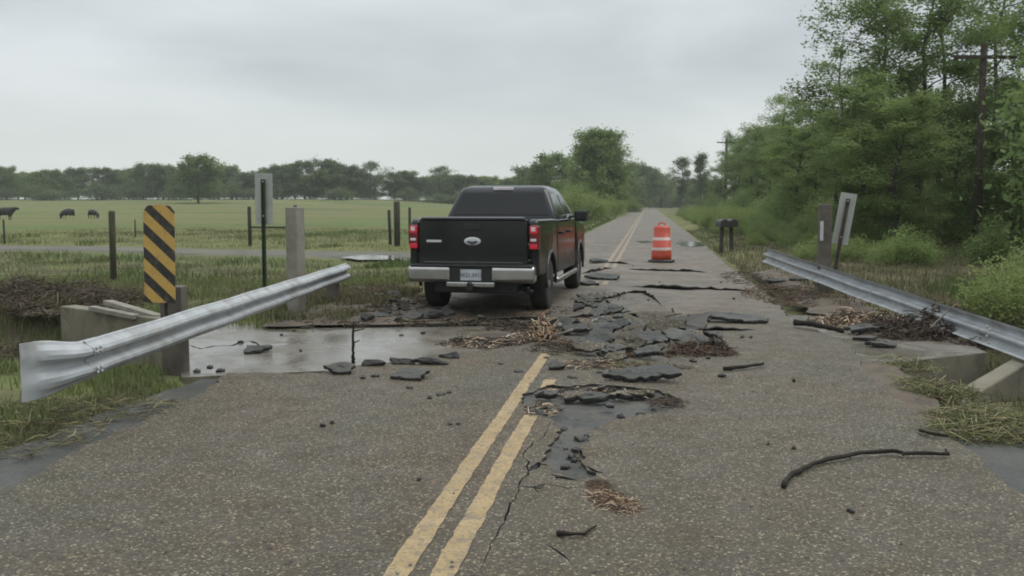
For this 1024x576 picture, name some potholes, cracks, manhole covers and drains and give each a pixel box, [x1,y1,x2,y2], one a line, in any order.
pothole [562,332,713,360]
crack [566,261,756,330]
pothole [523,386,676,479]
crack [489,435,595,551]
